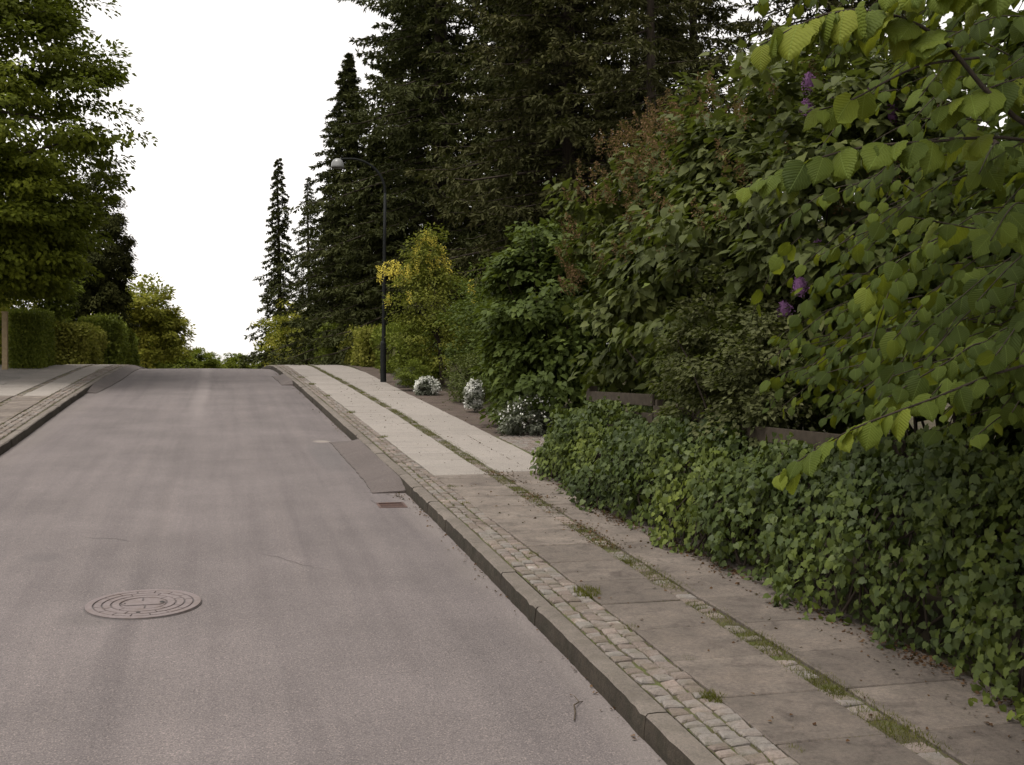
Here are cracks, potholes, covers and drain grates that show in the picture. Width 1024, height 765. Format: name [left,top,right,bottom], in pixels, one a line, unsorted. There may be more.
manhole cover [83,589,202,620]
